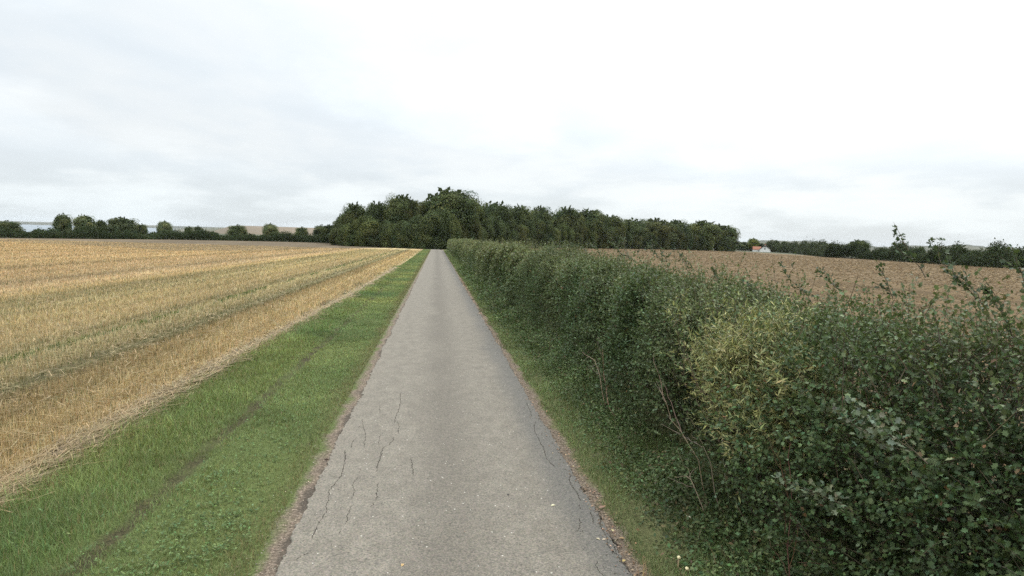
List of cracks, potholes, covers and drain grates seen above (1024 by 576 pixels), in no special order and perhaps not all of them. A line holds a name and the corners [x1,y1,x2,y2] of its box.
crack [526,403,631,575]
crack [285,396,401,562]
